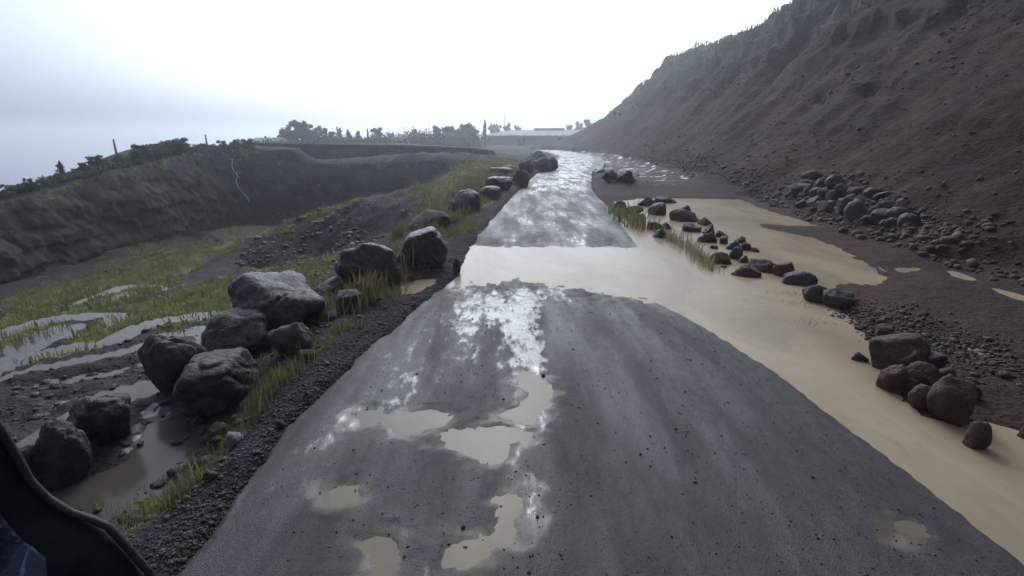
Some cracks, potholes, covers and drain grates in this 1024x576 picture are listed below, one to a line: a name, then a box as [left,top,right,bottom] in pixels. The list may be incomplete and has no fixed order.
pothole [863,504,940,549]
pothole [421,472,547,576]
pothole [480,364,566,432]
pothole [426,417,553,473]
pothole [337,517,426,576]
